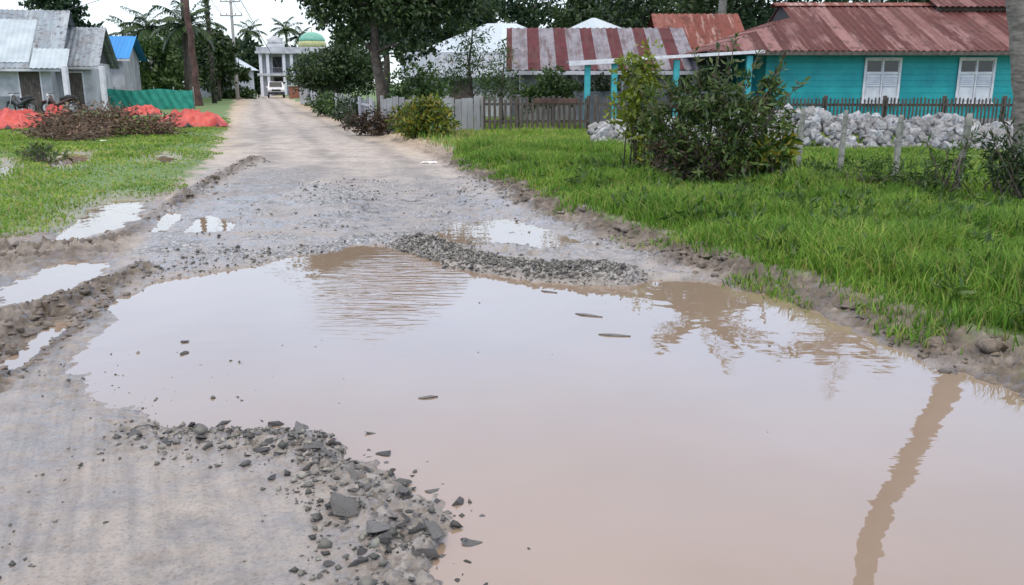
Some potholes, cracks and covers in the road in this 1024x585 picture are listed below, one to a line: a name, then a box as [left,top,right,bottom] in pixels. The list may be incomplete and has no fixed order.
pothole [180,214,240,233]
pothole [144,210,189,233]
pothole [55,237,1024,585]
pothole [428,216,586,249]
